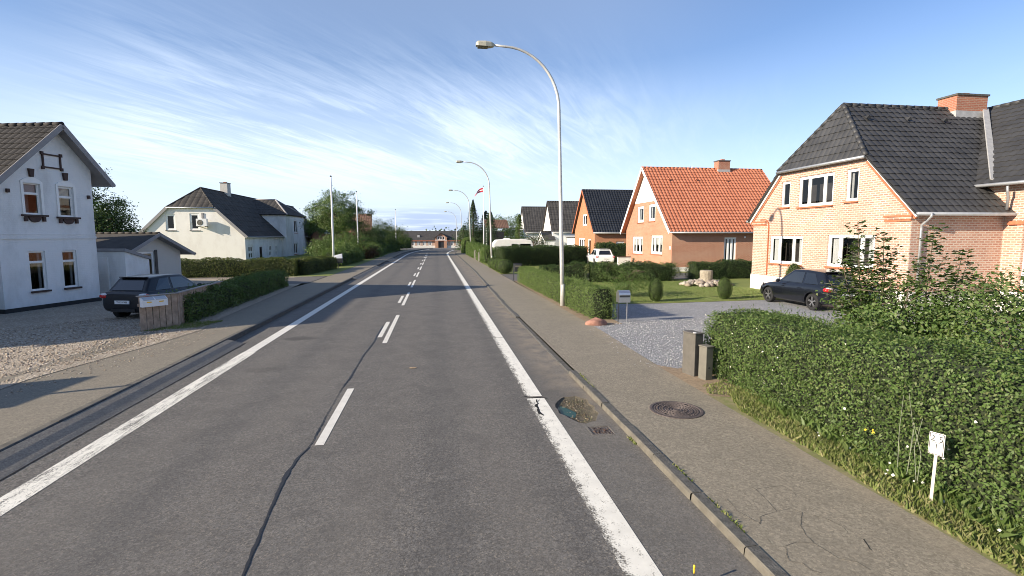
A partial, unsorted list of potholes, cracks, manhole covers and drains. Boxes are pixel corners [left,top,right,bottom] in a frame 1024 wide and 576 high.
manhole cover [649,401,704,419]
pothole [555,396,598,424]
drain grate [585,425,616,436]
crack [524,396,544,416]
crack [727,485,869,573]
